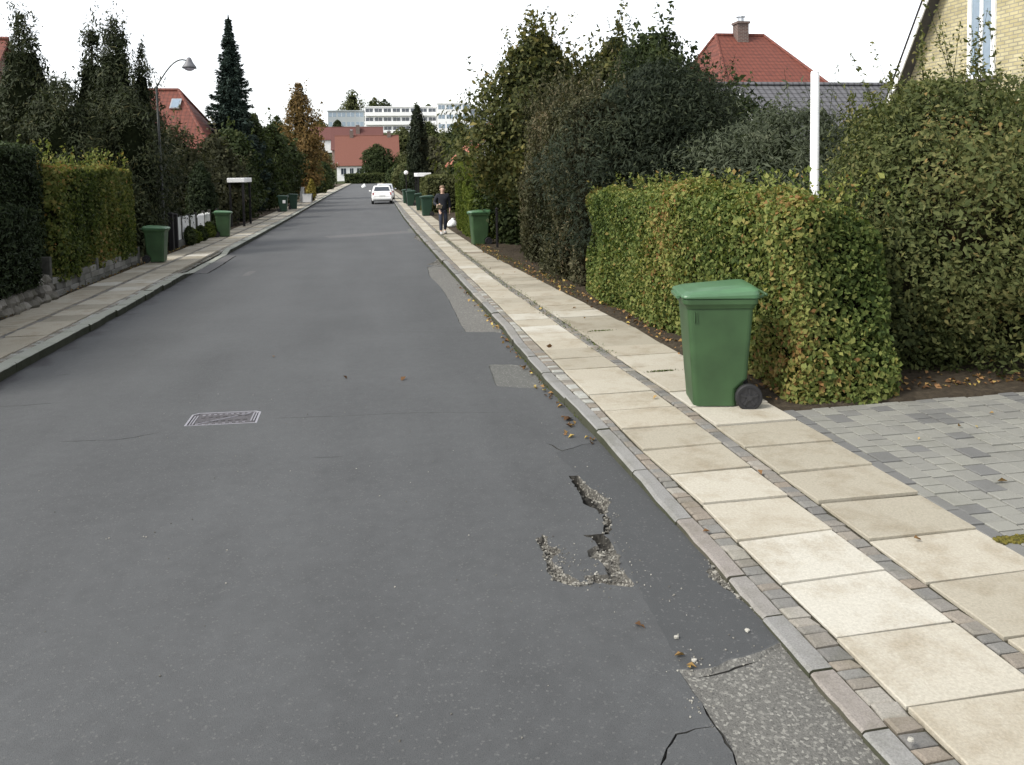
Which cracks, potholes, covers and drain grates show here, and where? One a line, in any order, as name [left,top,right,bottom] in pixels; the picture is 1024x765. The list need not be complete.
crack [661,662,755,765]
pothole [535,514,634,587]
pothole [569,475,611,514]
